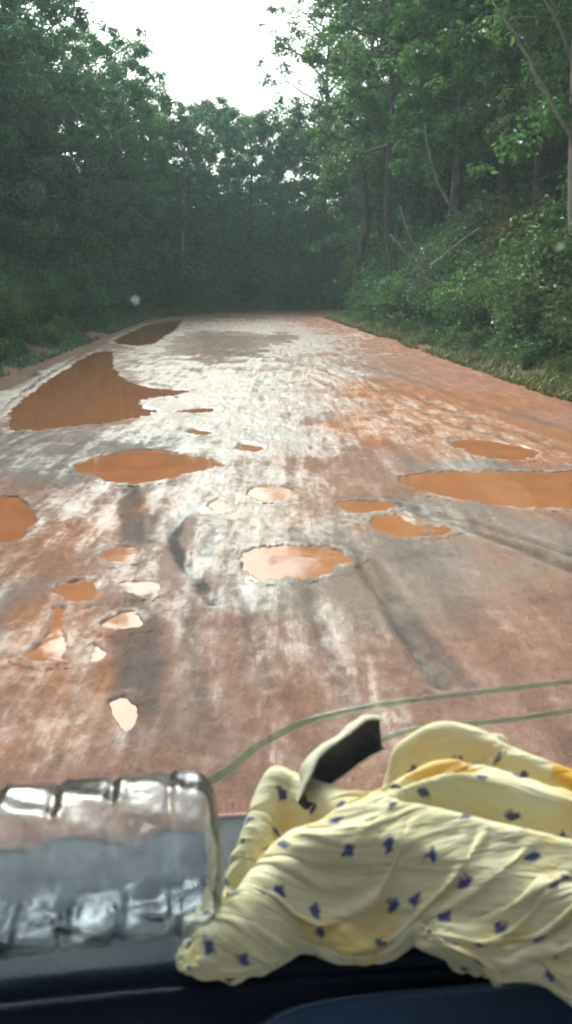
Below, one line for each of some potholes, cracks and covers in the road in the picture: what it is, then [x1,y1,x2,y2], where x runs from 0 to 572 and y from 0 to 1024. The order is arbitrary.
pothole [0,493,58,559]
pothole [385,468,572,513]
pothole [170,406,232,415]
pothole [0,350,204,434]
pothole [82,605,159,638]
pothole [229,481,315,505]
pothole [82,541,156,568]
pothole [223,441,278,455]
pothole [434,437,559,463]
pothole [221,538,368,585]
pothole [37,573,128,610]
